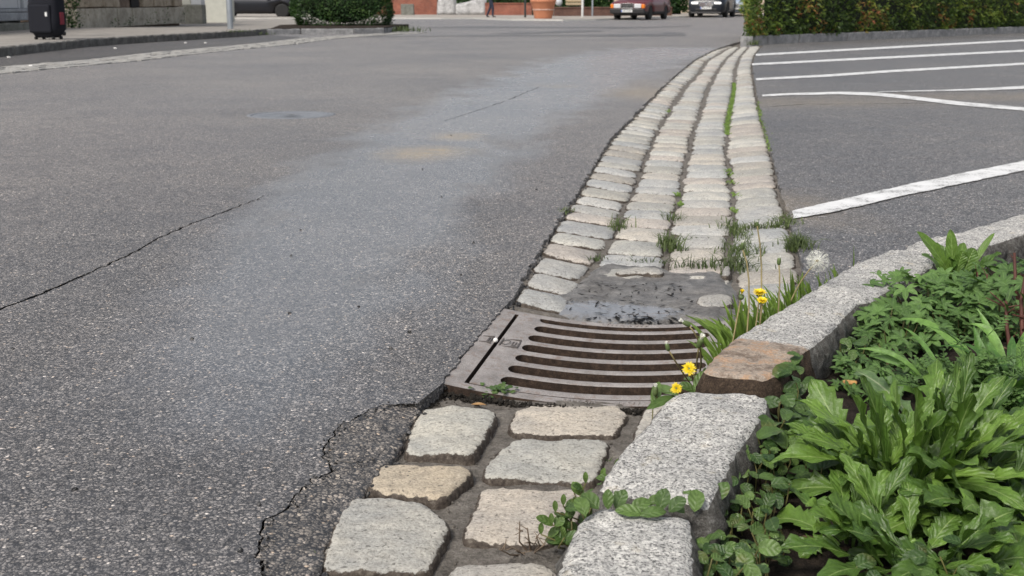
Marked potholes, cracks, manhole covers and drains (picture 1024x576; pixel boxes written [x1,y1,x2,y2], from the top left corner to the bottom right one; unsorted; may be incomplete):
crack [254,404,417,576]
crack [0,202,250,310]
manhole cover [246,111,335,119]
drain grate [444,308,736,409]
